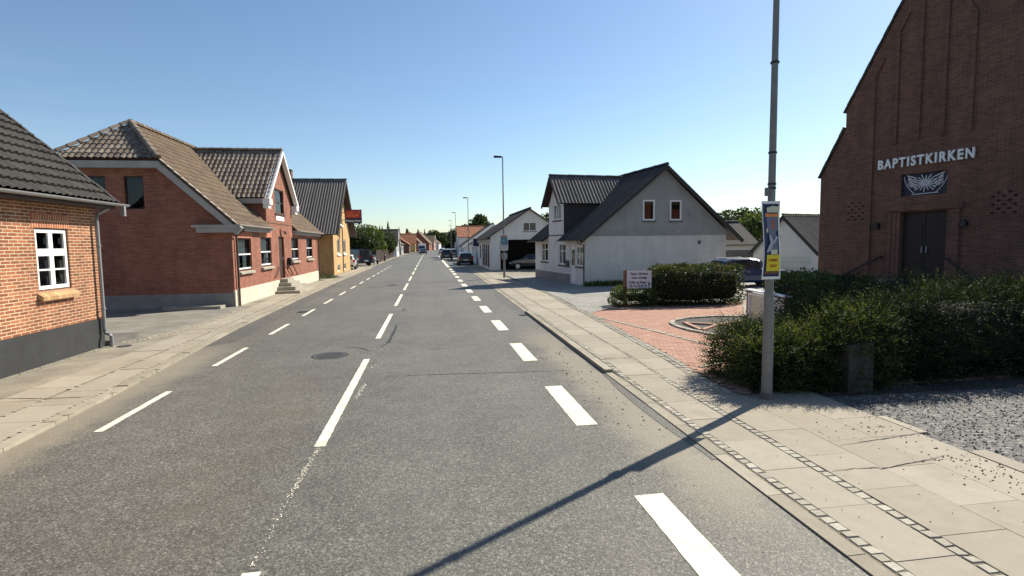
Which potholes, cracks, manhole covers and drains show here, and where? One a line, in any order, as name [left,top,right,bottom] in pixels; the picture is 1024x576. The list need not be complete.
crack [835,455,943,471]
